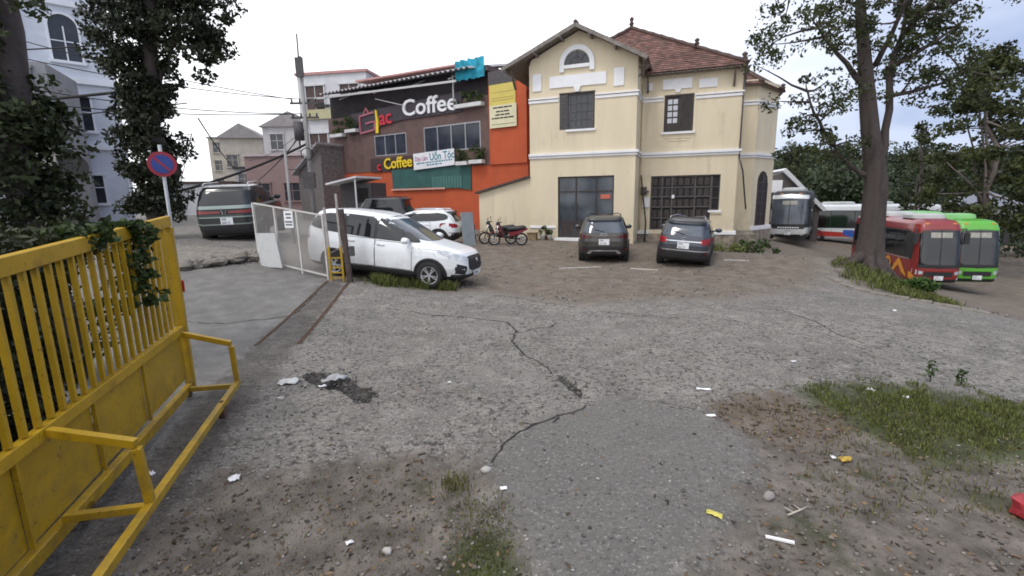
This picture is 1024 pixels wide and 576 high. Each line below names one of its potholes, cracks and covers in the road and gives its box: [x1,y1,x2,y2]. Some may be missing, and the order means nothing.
crack [489,404,589,463]
pothole [545,370,596,407]
pothole [287,369,390,409]
crack [774,309,886,352]
crack [383,308,557,374]
crack [187,292,318,325]
